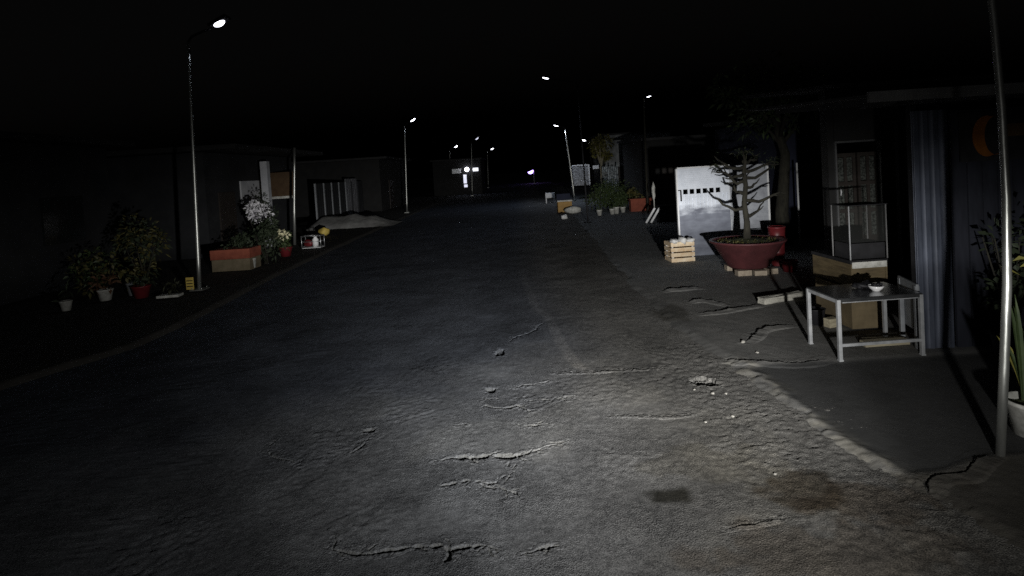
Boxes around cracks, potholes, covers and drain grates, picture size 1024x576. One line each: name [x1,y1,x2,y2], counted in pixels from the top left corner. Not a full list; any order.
crack [720,515,788,533]
crack [904,448,1008,505]
crack [428,367,669,503]
crack [323,534,565,567]
crack [344,432,385,456]
crack [504,322,546,346]
crack [653,286,839,369]
